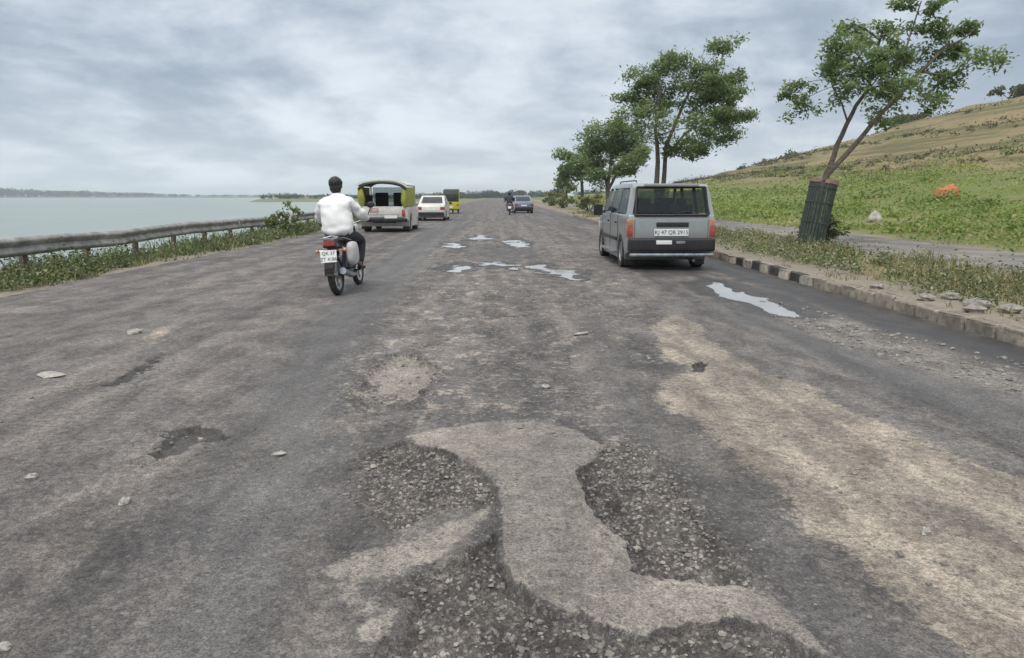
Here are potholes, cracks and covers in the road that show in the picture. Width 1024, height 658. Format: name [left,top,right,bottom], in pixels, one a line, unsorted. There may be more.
pothole [375,525,831,658]
pothole [426,262,478,273]
pothole [127,418,256,468]
pothole [86,351,178,392]
pothole [682,359,717,374]
pothole [565,440,775,595]
pothole [345,440,509,536]
pothole [467,262,525,271]
pothole [514,262,595,282]
pothole [335,353,450,416]
pothole [432,242,471,250]
pothole [495,237,538,249]
